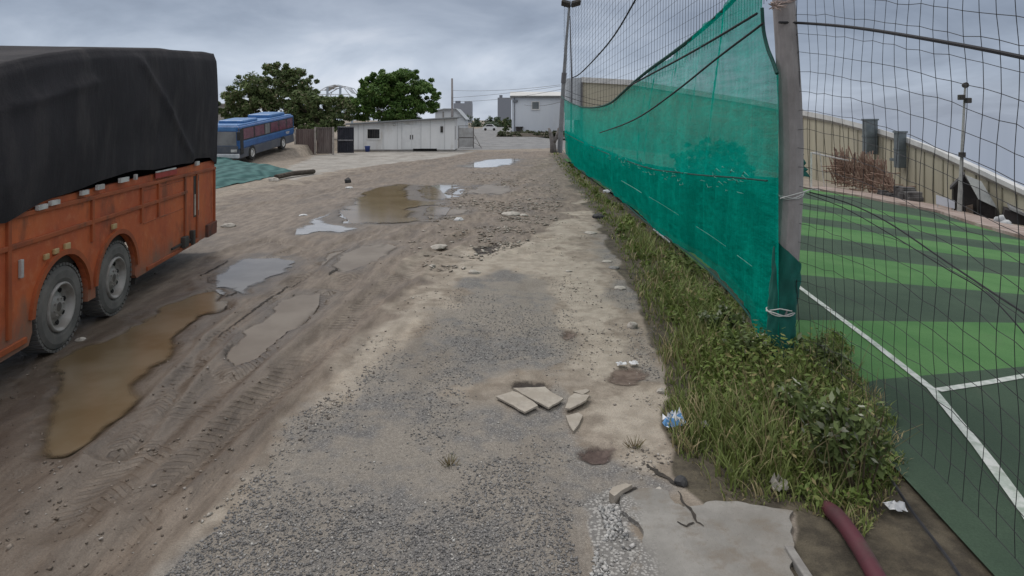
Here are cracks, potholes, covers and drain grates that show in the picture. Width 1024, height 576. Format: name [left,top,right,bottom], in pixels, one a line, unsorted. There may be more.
pothole [579,447,615,464]
pothole [606,368,648,386]
crack [621,464,704,527]
